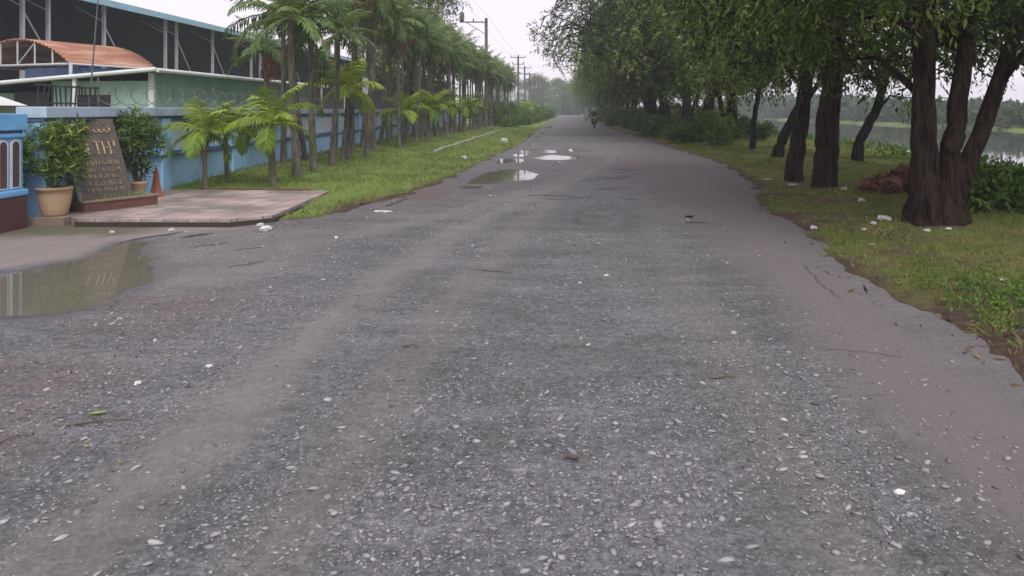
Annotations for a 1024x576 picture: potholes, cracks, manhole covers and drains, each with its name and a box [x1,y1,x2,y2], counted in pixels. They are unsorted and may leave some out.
crack [119,231,264,268]
pothole [0,242,156,320]
crack [825,349,901,357]
crack [802,264,841,299]
pothole [465,169,539,184]
